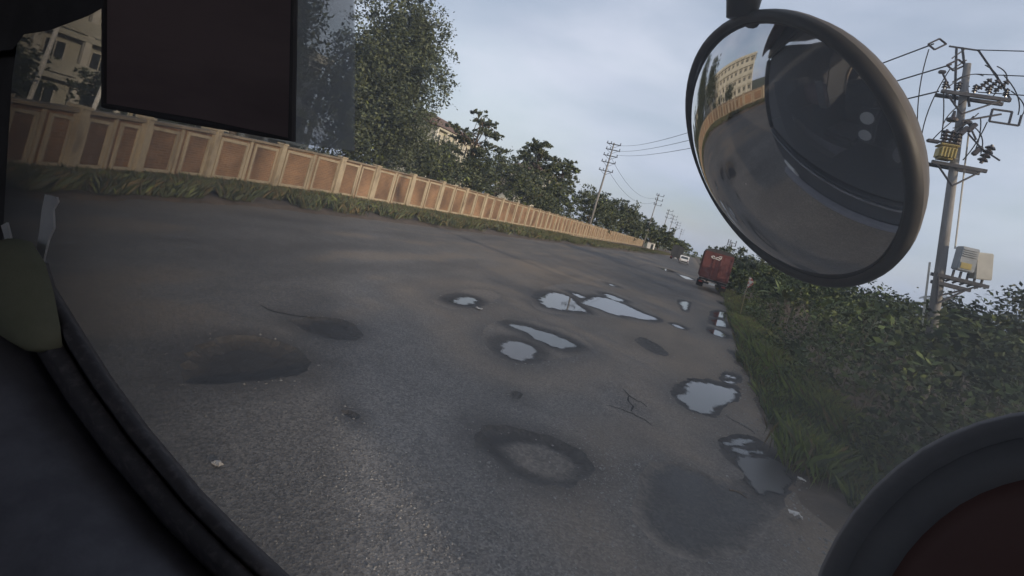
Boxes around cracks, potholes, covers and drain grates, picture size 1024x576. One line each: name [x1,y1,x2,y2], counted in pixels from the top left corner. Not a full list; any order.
pothole [531,284,664,324]
pothole [481,318,593,364]
pothole [677,299,692,313]
pothole [432,289,500,310]
crack [608,389,649,423]
pothole [474,425,596,488]
pothole [706,309,733,340]
pothole [670,378,742,418]
